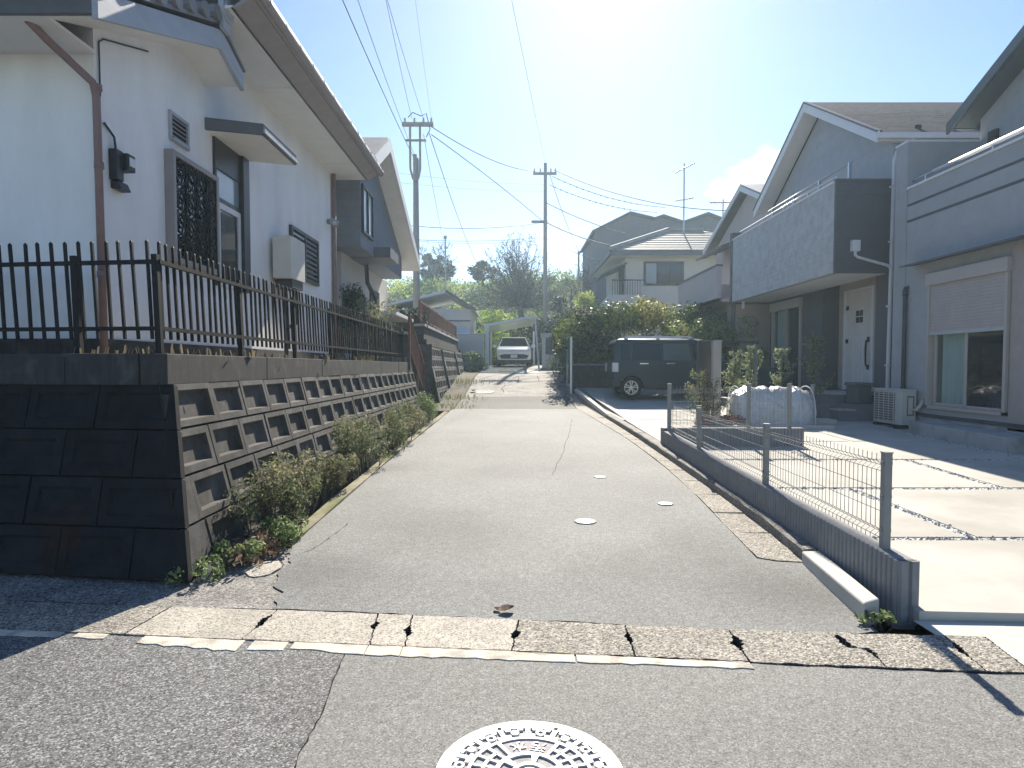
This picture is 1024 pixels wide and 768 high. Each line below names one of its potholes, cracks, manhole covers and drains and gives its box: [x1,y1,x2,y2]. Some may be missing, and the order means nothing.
manhole cover [436,721,623,768]
crack [275,609,879,639]
